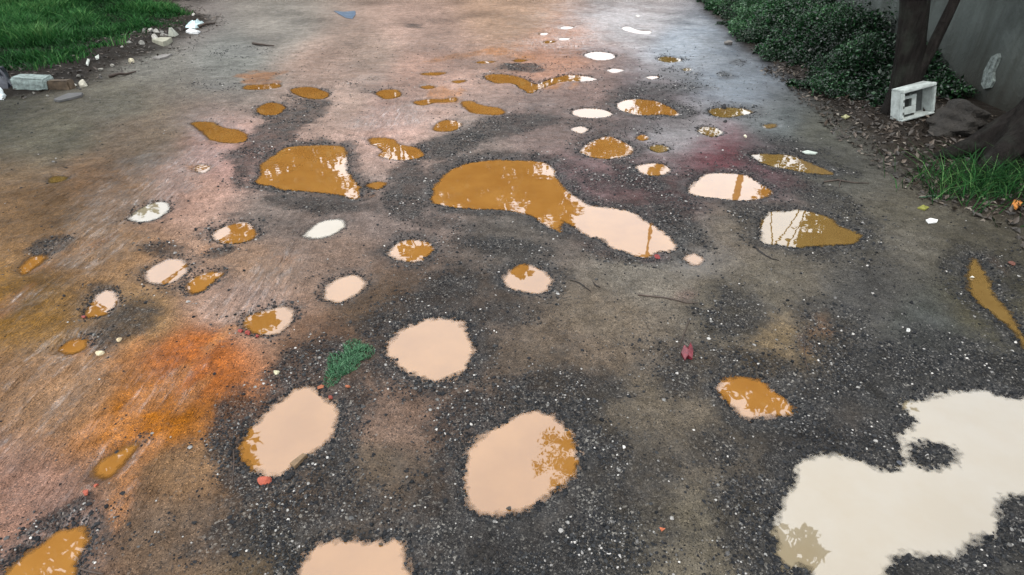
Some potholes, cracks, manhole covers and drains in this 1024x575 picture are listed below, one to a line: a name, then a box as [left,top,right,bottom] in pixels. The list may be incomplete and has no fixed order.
pothole [493,258,563,297]
pothole [247,141,367,201]
pothole [753,204,872,250]
pothole [312,268,375,305]
pothole [224,378,352,486]
pothole [133,252,198,288]
pothole [450,399,593,527]
pothole [681,169,779,203]
